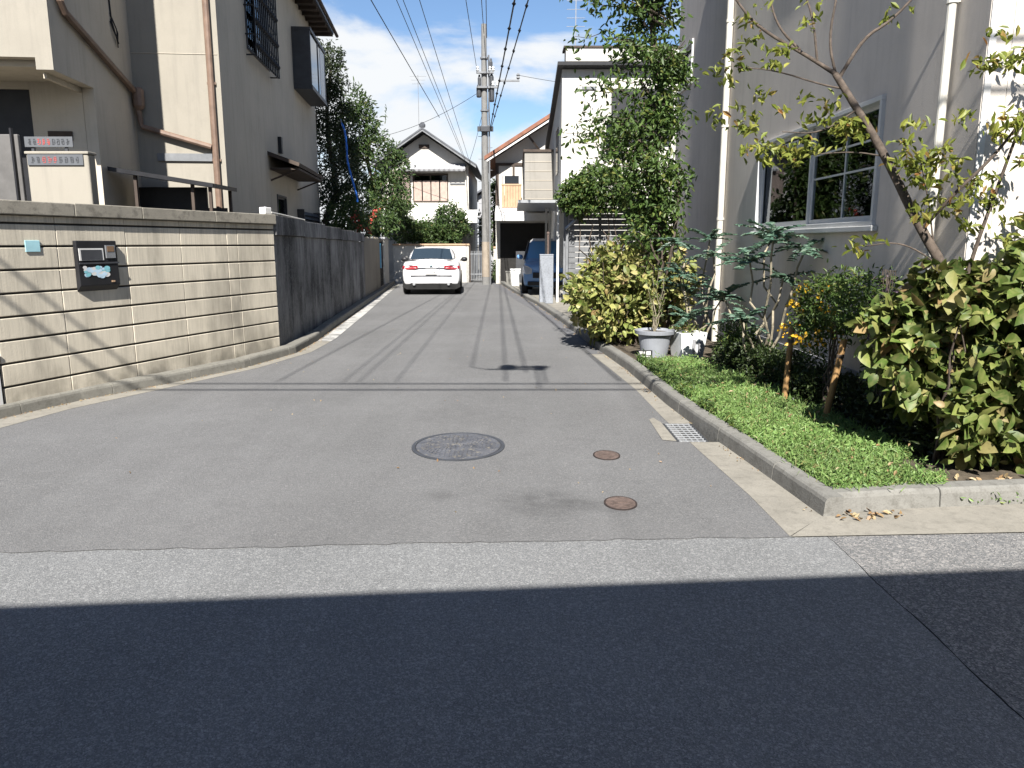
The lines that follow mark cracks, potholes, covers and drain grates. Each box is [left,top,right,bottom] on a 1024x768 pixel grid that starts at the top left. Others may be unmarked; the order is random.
manhole cover [411,432,505,461]
drain grate [663,424,709,447]
manhole cover [604,496,637,511]
manhole cover [593,450,620,460]
